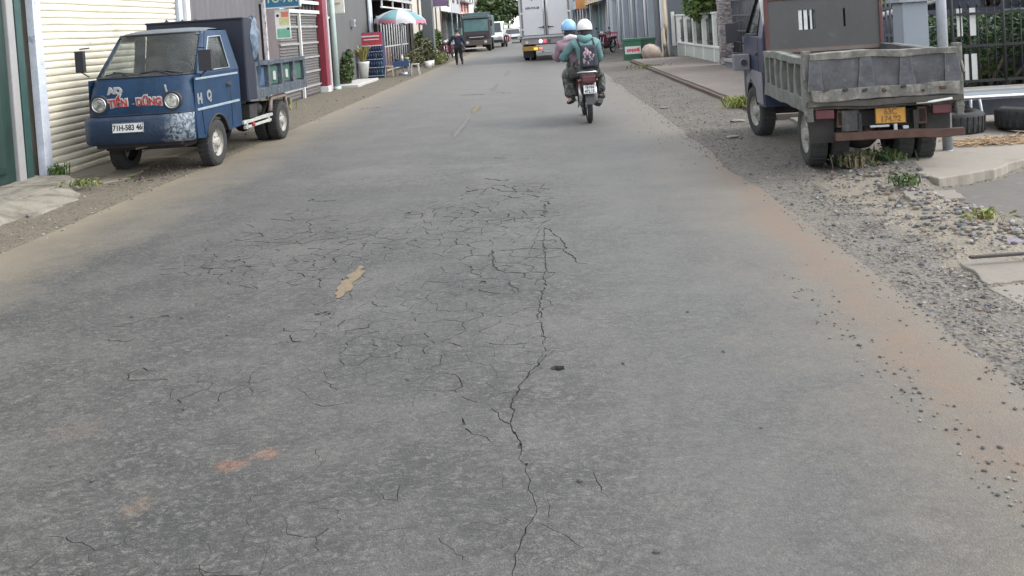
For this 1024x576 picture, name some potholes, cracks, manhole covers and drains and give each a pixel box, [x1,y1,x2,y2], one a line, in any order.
crack [10,178,588,576]
